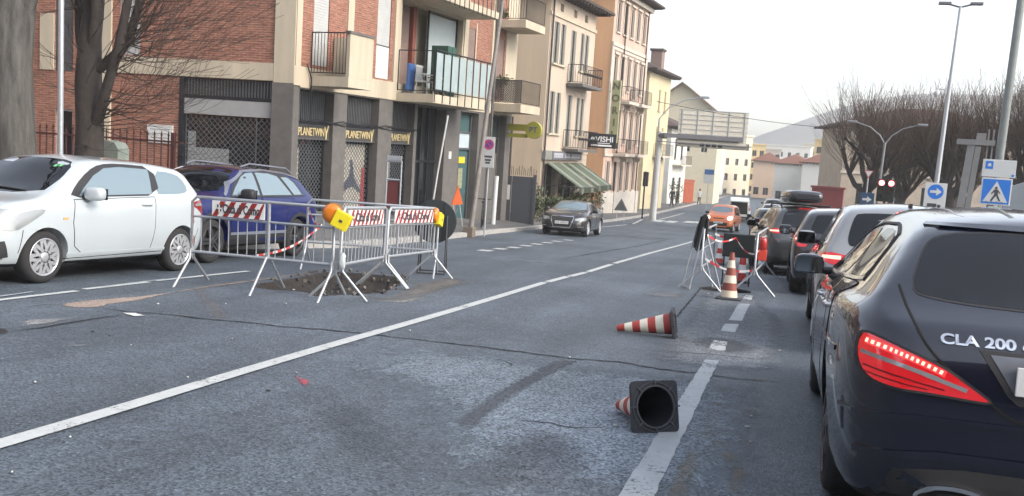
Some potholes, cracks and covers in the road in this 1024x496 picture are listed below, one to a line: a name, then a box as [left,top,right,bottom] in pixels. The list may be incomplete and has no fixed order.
pothole [255,272,400,296]
crack [106,308,784,383]
